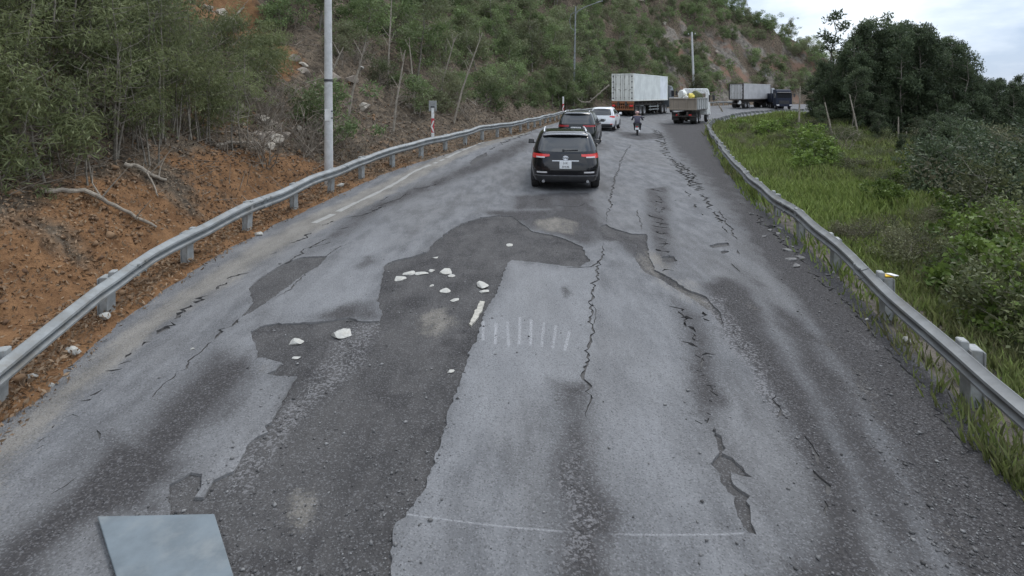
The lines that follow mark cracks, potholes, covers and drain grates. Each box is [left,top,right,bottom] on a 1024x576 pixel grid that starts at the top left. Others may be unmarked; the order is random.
crack [37,184,436,449]
crack [606,145,631,219]
crack [568,246,605,424]
crack [647,130,740,272]
